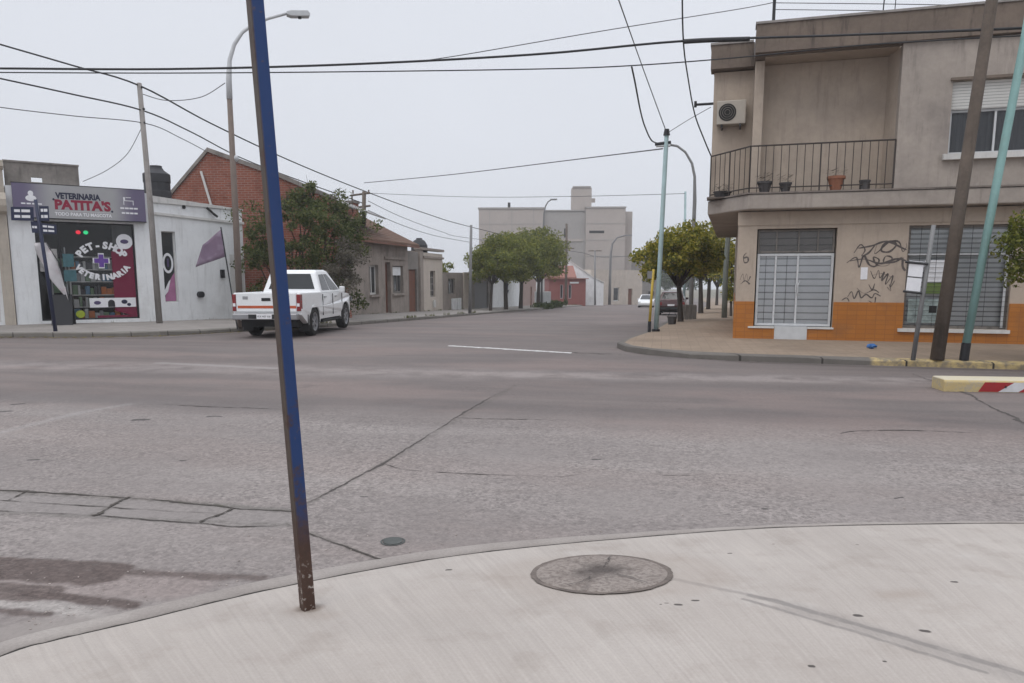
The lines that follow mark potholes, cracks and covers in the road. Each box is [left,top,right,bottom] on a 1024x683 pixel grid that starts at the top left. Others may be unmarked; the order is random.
manhole cover [530,554,673,594]
utility cover [380,537,405,545]
crack [917,375,1024,423]
